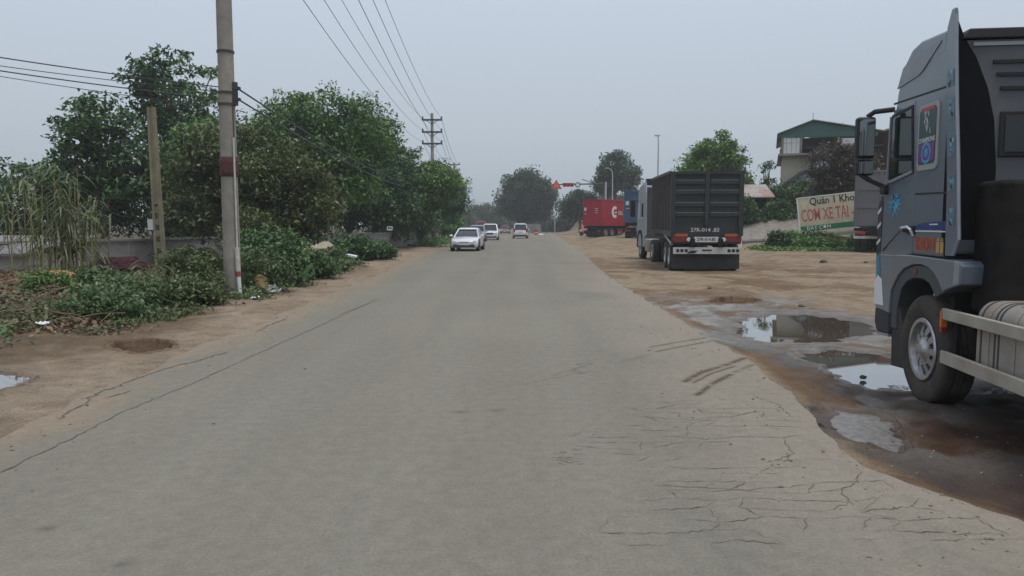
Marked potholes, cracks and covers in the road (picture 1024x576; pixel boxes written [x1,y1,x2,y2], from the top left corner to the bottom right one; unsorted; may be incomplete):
crack [558,393,1012,545]
pothole [787,344,912,393]
crack [1,352,241,472]
pothole [722,309,883,344]
pothole [704,296,762,304]
pothole [105,338,178,354]
crack [244,298,379,360]
